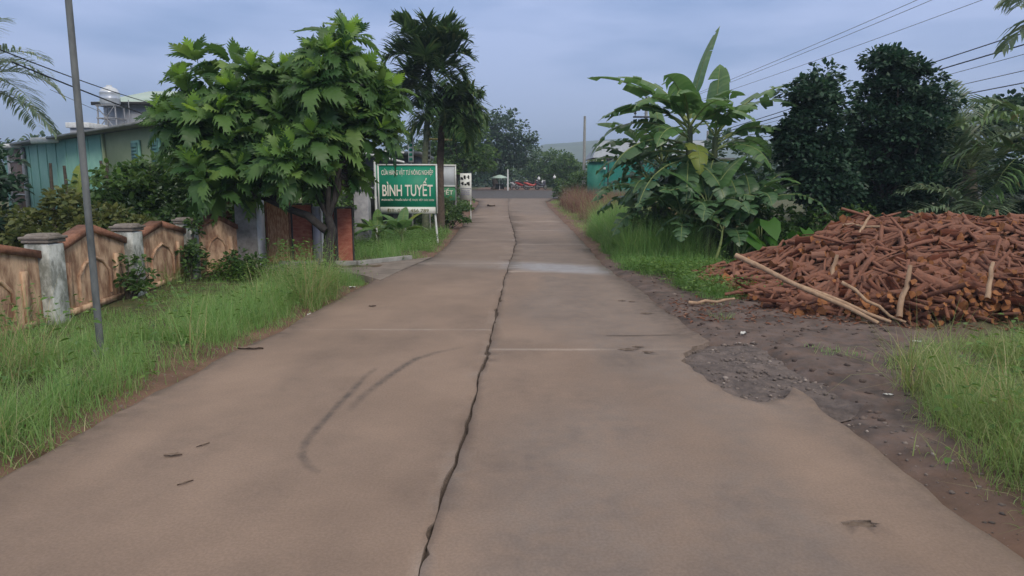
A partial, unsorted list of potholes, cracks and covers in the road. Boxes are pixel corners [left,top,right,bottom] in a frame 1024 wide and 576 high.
pothole [685,341,864,422]
crack [419,216,517,575]
